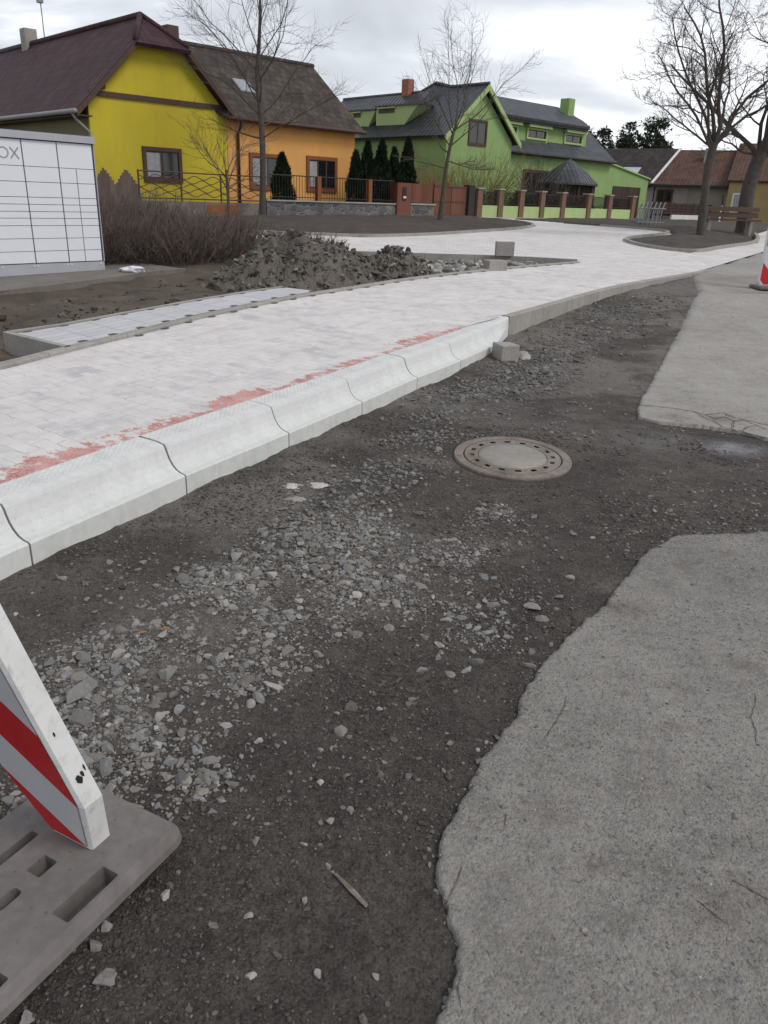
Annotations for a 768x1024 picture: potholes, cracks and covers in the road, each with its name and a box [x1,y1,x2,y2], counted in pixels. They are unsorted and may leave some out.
crack [645,405,767,438]
manhole cover [454,436,572,482]
